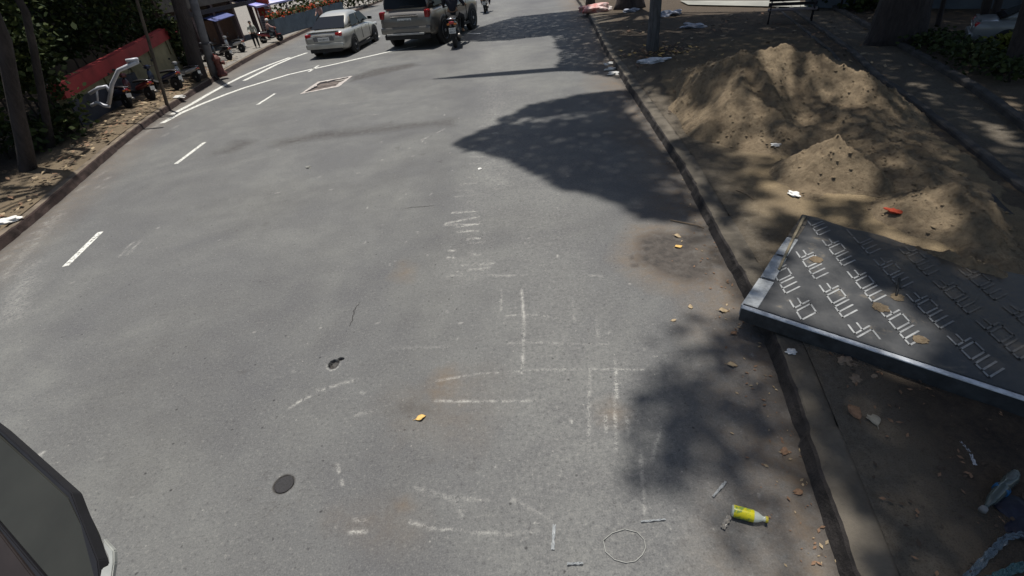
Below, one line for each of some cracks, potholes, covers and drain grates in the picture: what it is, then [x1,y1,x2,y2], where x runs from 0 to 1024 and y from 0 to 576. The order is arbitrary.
manhole cover [259,466,307,503]
manhole cover [301,76,352,94]
